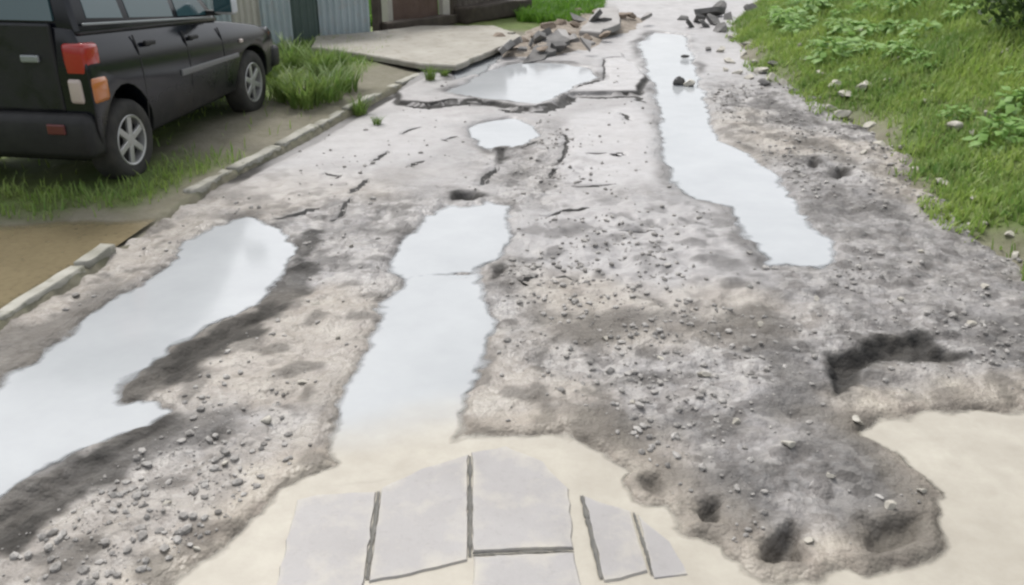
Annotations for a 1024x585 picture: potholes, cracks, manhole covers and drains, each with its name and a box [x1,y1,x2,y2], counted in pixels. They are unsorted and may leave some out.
pothole [150,398,1024,585]
pothole [632,31,851,271]
pothole [441,60,603,105]
pothole [379,196,521,284]
crack [262,80,649,223]
pothole [818,331,973,397]
pothole [0,211,308,507]
pothole [463,116,545,153]
